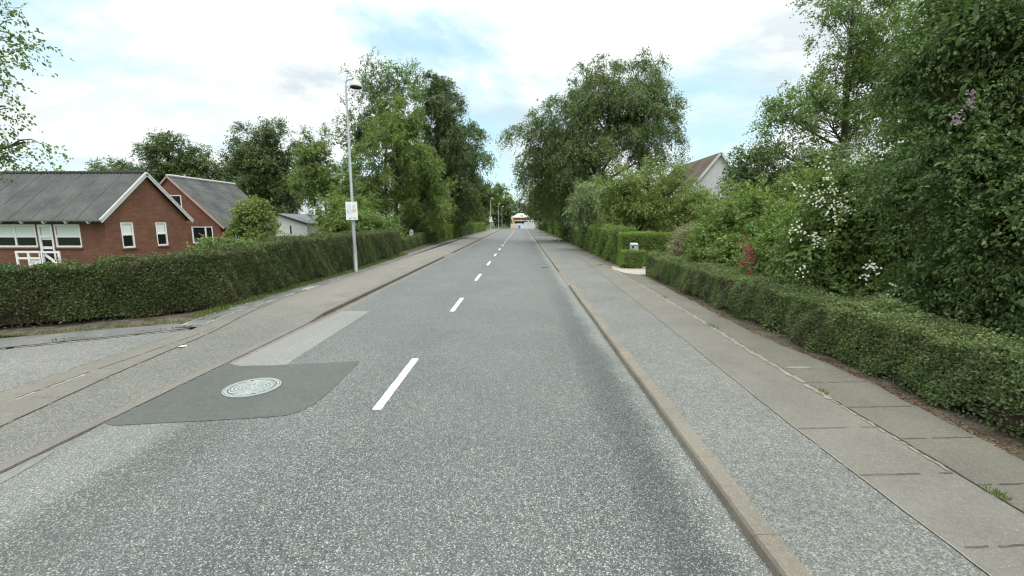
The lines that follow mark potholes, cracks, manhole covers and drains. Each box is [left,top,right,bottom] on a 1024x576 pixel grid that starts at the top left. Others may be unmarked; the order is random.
manhole cover [221,378,283,398]
